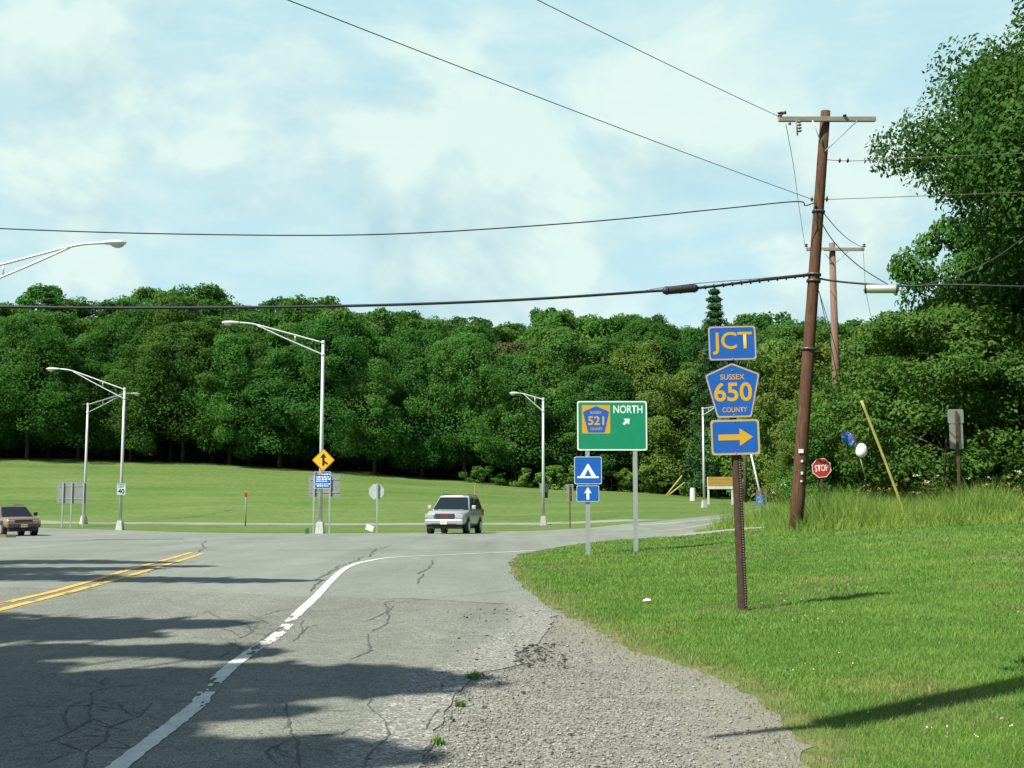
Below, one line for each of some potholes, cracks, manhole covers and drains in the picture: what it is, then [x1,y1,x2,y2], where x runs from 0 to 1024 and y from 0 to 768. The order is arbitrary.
crack [256,694,391,768]
crack [351,600,394,659]
crack [0,674,213,768]
crack [417,707,445,752]
